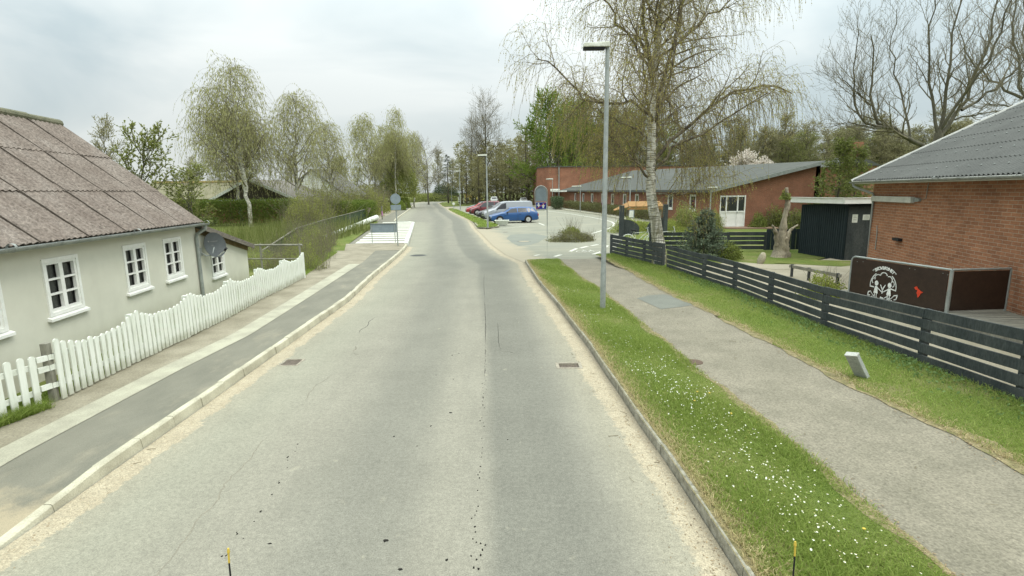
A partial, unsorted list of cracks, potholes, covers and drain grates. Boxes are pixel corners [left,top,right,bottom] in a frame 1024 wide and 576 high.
crack [156,434,295,576]
